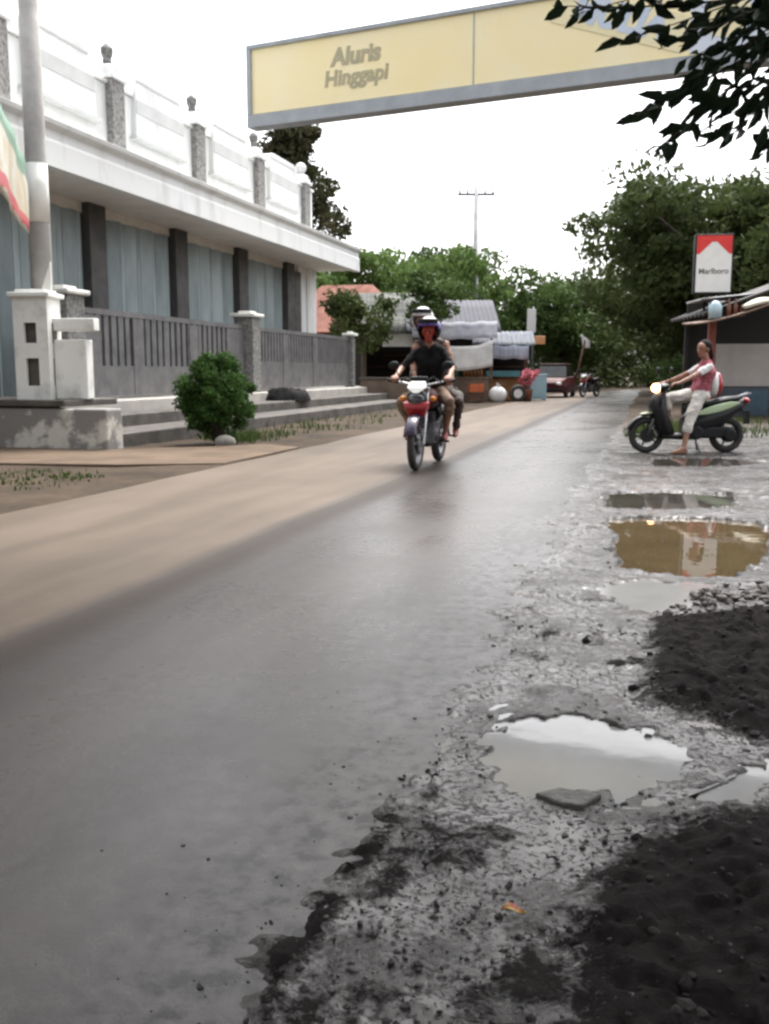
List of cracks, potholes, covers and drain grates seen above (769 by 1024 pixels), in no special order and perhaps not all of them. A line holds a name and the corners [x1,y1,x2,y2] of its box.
pothole [582,577,720,613]
pothole [681,751,769,806]
pothole [597,515,769,578]
pothole [646,455,769,467]
pothole [437,704,741,821]
pothole [598,490,743,510]
